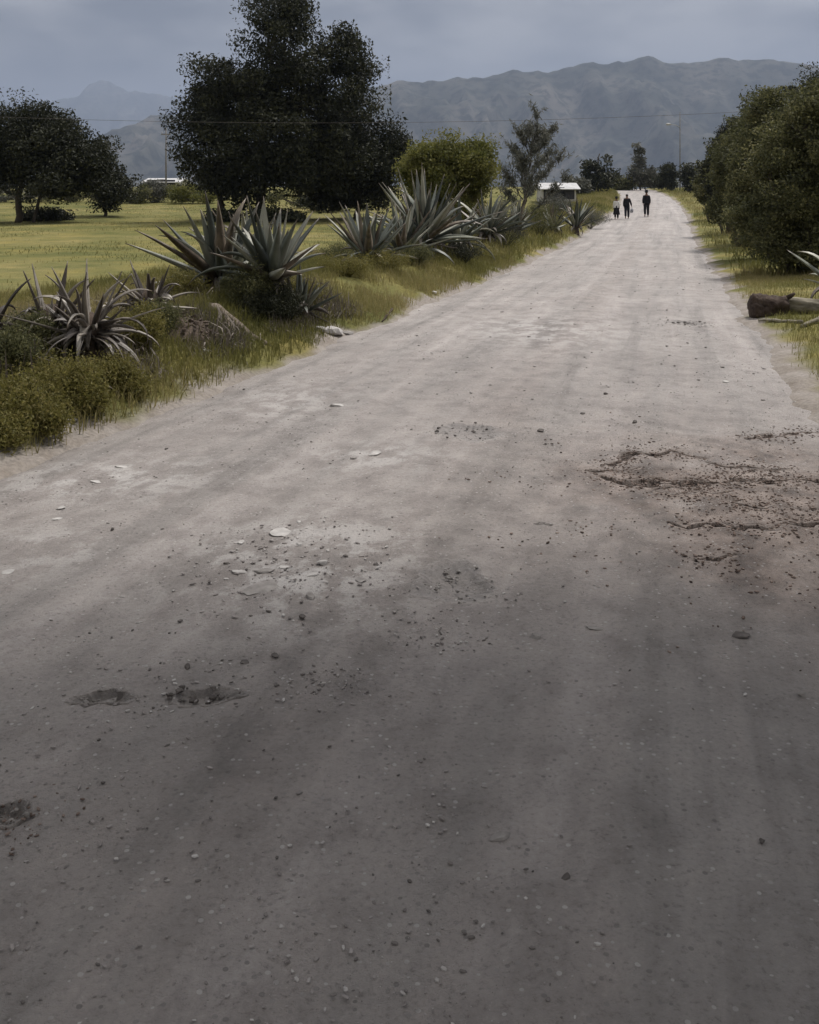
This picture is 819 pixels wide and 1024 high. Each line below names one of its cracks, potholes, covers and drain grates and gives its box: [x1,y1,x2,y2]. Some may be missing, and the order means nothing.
crack [585,432,819,563]
pothole [166,685,250,708]
pothole [433,422,506,444]
pothole [0,799,30,830]
pothole [64,688,138,707]
